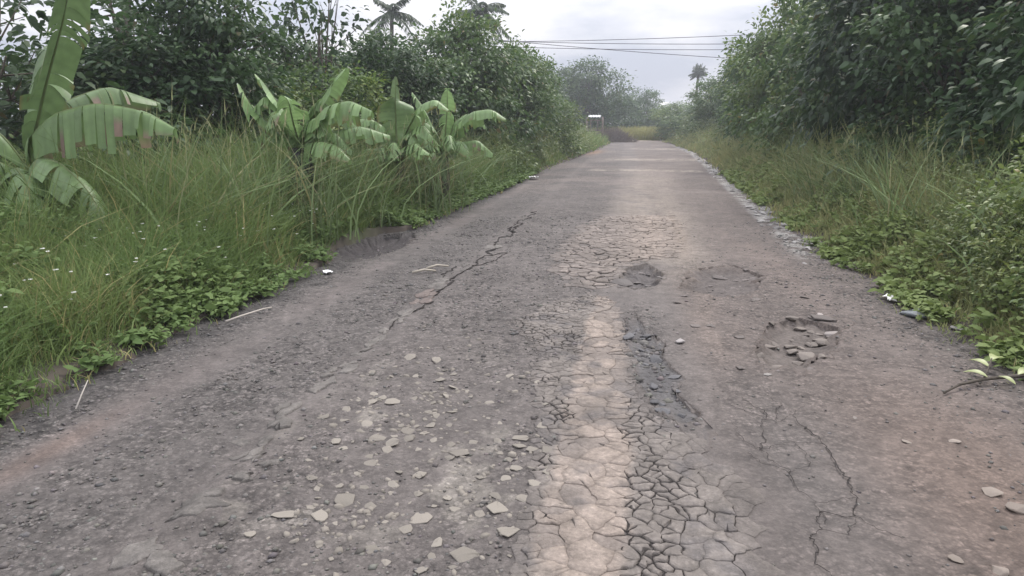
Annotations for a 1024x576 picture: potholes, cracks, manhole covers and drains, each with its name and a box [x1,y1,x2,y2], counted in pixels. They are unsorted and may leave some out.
crack [523,358,746,576]
pothole [675,265,768,300]
crack [515,296,623,351]
crack [734,393,900,576]
pothole [748,313,855,377]
pothole [613,261,668,290]
pothole [622,312,717,454]
crack [389,211,537,329]
crack [559,218,679,286]
